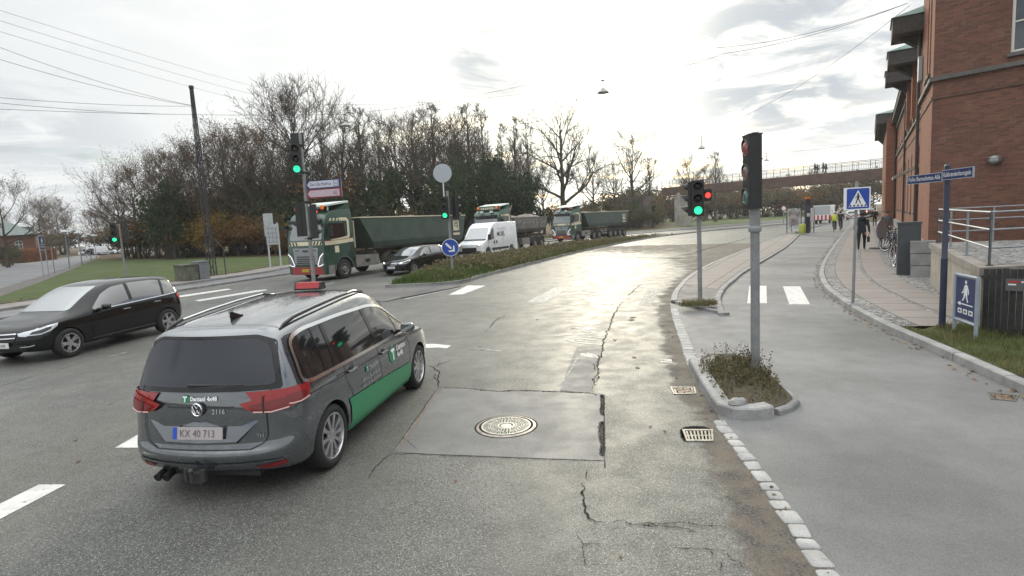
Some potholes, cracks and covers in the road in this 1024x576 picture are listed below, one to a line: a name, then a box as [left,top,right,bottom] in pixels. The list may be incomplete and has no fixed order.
drain grate [682,429,714,442]
manhole cover [474,415,538,438]
drain grate [988,392,1019,402]
crack [576,470,743,570]
crack [592,285,640,395]
drain grate [670,387,697,395]
